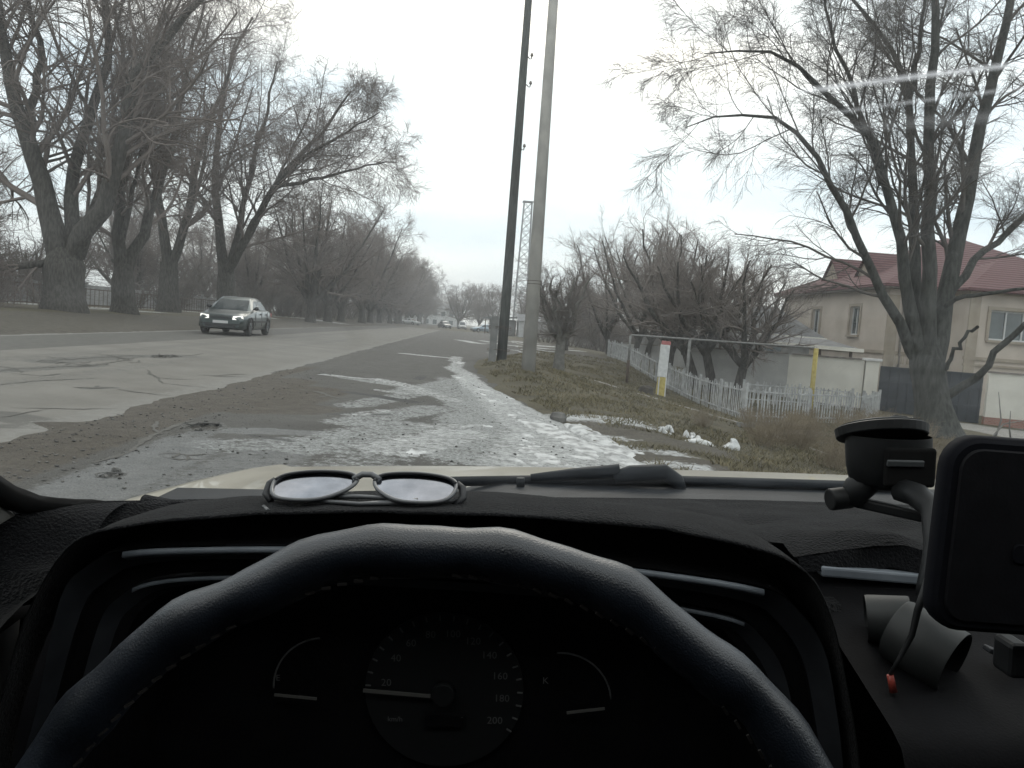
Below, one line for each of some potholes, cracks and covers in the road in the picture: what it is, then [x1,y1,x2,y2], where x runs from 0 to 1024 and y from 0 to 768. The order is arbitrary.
crack [0,353,255,463]
pothole [95,467,127,479]
pothole [180,419,228,431]
